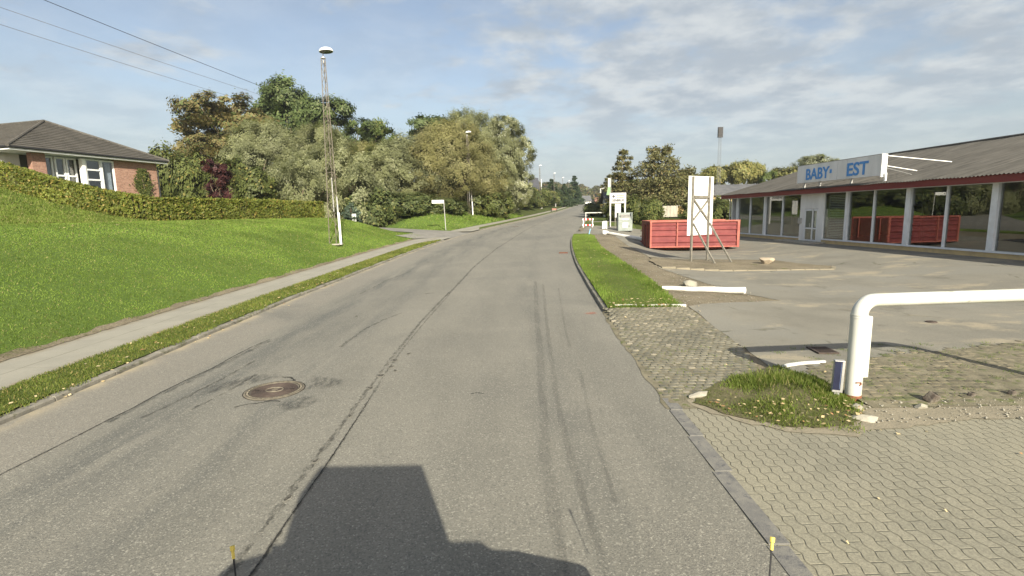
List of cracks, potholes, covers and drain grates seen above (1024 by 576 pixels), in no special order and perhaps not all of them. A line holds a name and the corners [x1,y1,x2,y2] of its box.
drain grate [806,346,840,354]
manhole cover [242,381,306,401]
